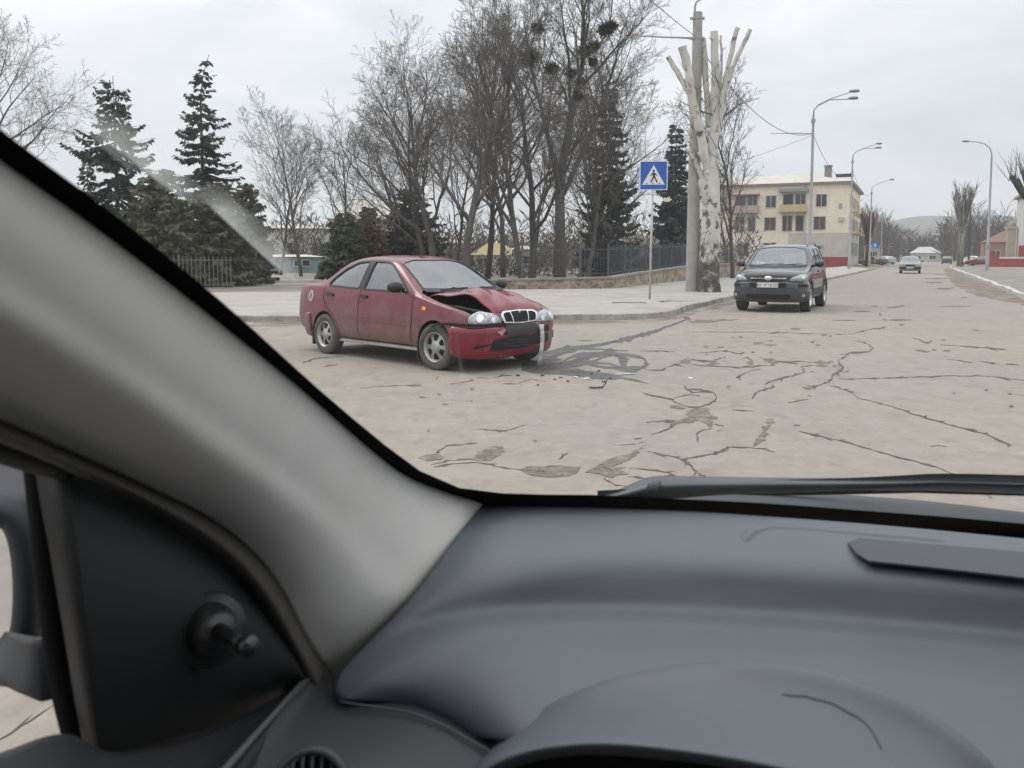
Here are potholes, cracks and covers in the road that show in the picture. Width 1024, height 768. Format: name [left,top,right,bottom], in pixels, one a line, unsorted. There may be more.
crack [604,326,1024,486]
crack [431,425,568,469]
crack [799,431,992,498]
